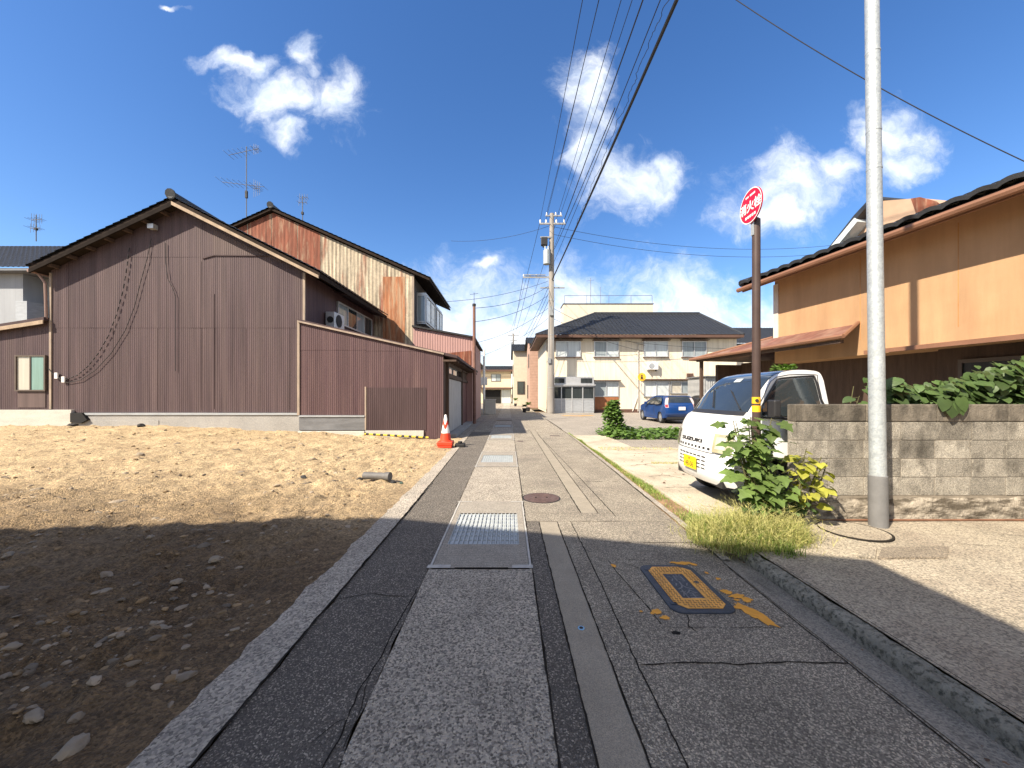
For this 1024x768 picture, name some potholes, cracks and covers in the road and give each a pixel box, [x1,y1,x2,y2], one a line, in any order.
drain grate [475,452,518,467]
drain grate [427,501,533,569]
manhole cover [640,565,735,614]
manhole cover [523,493,561,504]
